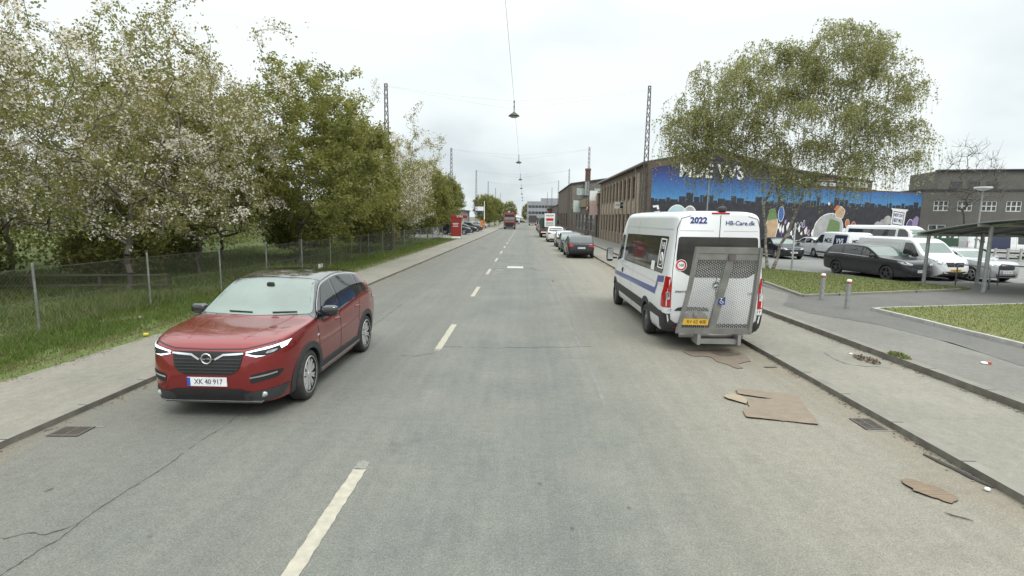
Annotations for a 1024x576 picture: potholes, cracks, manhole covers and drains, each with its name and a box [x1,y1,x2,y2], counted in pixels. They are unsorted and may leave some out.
drain grate [46,426,106,437]
drain grate [849,418,897,432]
crack [0,282,454,576]
